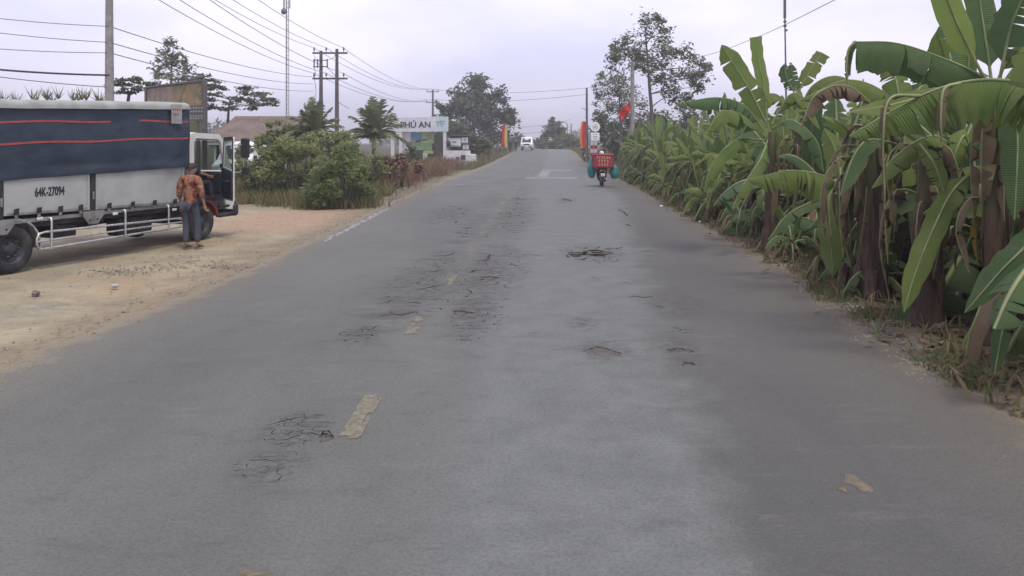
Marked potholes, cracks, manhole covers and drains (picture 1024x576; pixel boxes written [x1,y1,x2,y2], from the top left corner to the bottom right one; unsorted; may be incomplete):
crack [235,413,334,483]
pothole [582,346,621,356]
pothole [319,433,334,443]
crack [340,197,537,342]
